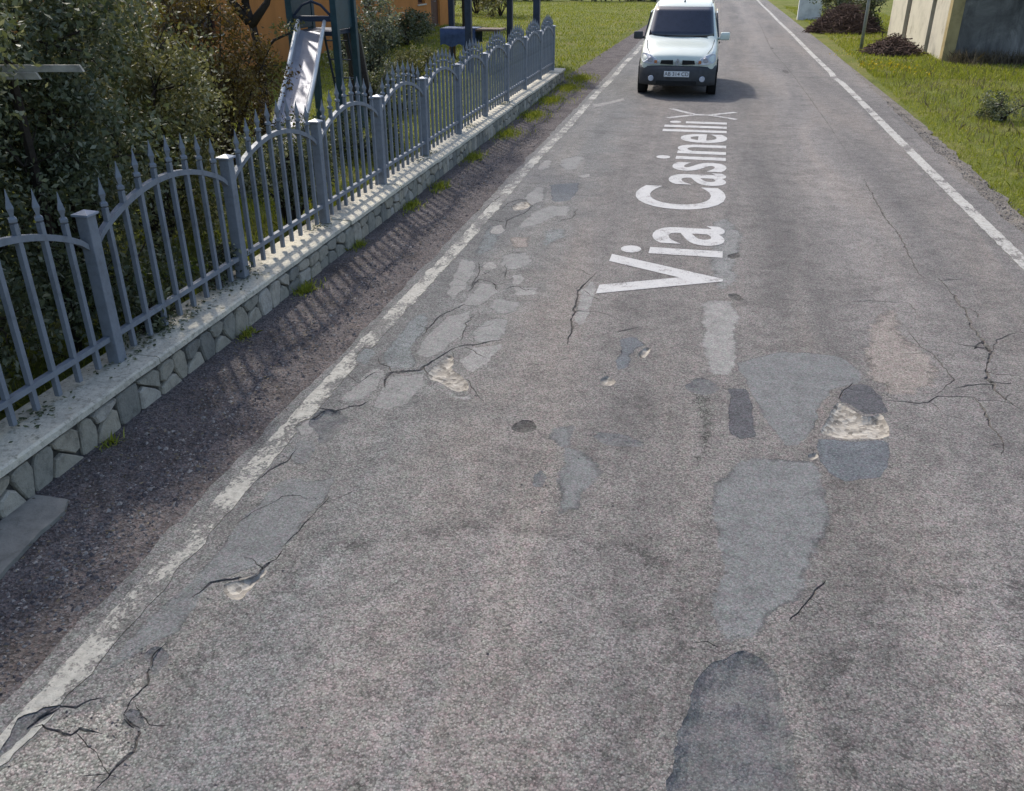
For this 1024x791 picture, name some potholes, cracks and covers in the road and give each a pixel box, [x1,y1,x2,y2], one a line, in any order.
crack [192,490,355,597]
pothole [821,403,889,439]
pothole [511,420,537,433]
crack [258,448,300,480]
pothole [428,355,469,392]
crack [850,179,1023,455]
crack [27,642,170,789]
crack [789,581,829,621]
crack [567,269,605,345]
pothole [223,569,267,600]
